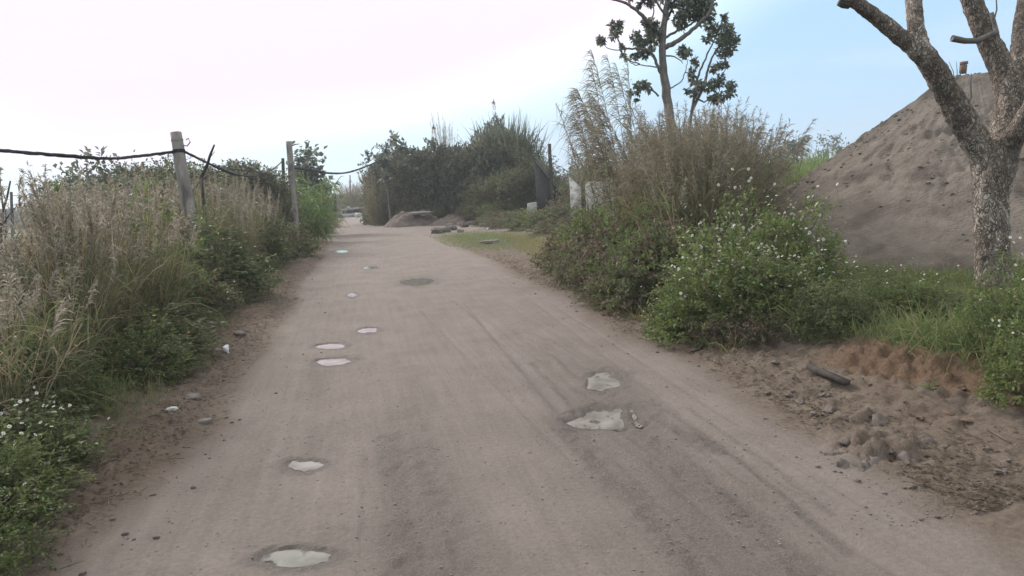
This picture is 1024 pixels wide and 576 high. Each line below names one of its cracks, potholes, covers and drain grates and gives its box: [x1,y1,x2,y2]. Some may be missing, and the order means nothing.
pothole [280,456,330,475]
pothole [579,366,633,393]
pothole [239,542,341,571]
pothole [310,355,362,366]
pothole [397,277,438,287]
pothole [312,341,349,349]
pothole [550,399,658,433]
